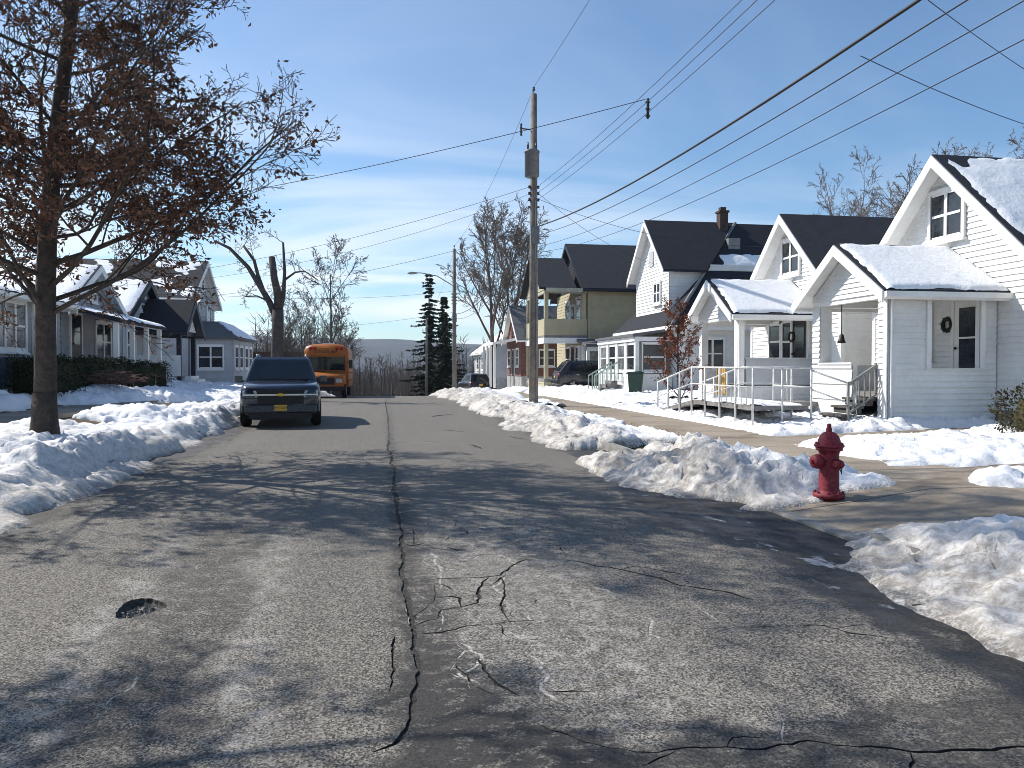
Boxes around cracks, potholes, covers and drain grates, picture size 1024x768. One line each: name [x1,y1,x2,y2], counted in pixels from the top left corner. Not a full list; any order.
pothole [115,598,167,619]
crack [405,516,700,706]
crack [533,672,1024,768]
crack [568,560,896,643]
